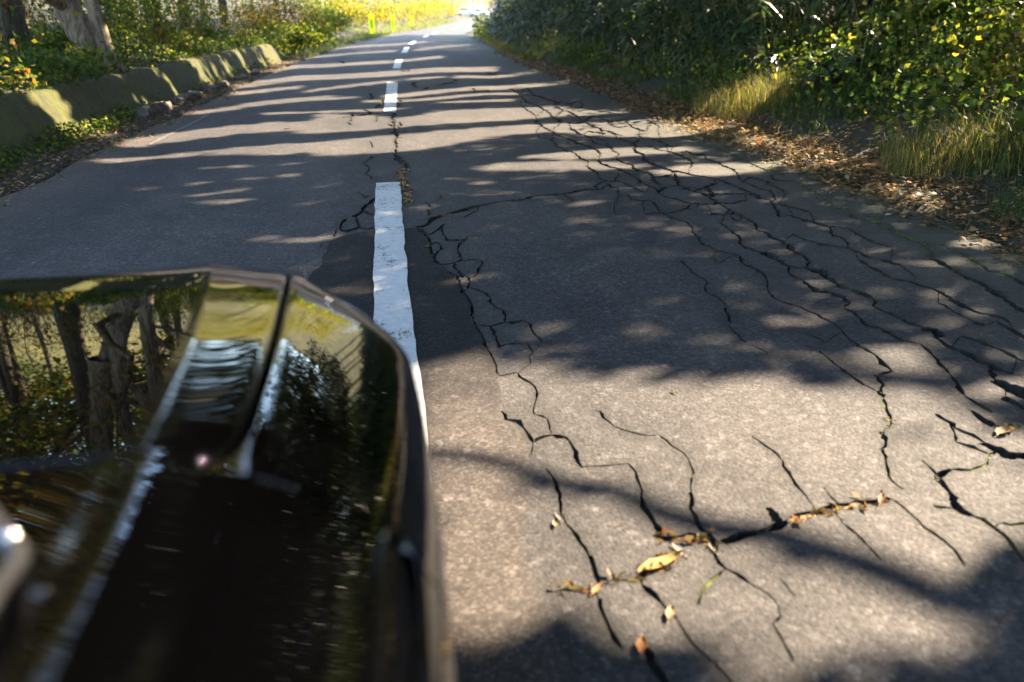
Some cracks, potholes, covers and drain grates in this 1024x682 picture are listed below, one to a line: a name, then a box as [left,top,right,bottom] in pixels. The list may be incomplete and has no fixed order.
crack [321,70,1024,682]
